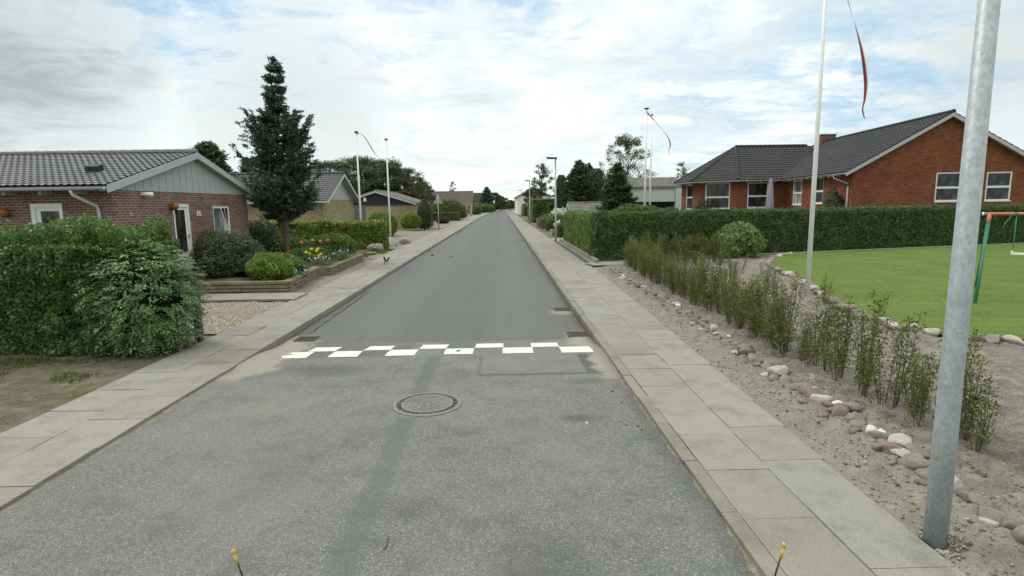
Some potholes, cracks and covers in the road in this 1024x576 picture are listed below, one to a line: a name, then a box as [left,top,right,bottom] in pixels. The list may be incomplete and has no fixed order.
manhole cover [392,392,462,417]
